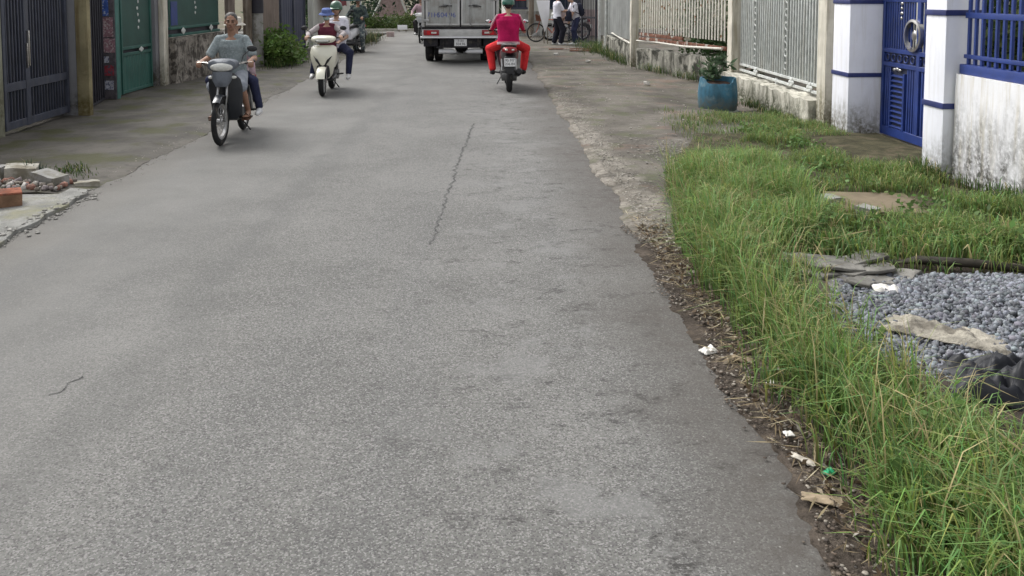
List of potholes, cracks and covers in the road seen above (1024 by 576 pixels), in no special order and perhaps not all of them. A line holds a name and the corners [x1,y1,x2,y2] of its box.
crack [428,123,476,245]
crack [49,376,84,395]
